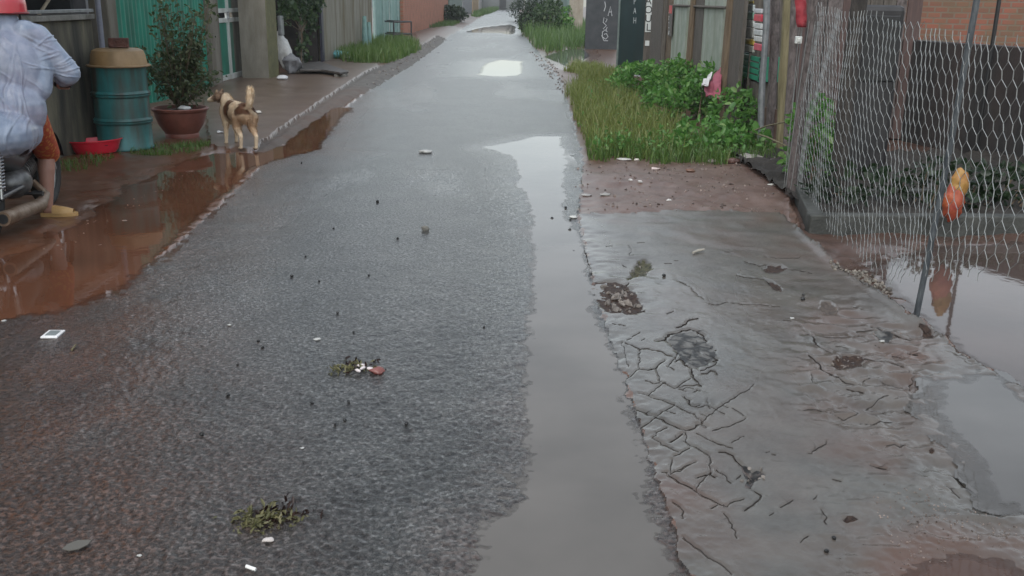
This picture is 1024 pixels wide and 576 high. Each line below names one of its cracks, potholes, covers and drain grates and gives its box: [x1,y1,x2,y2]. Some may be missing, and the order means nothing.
crack [612,281,918,574]
pothole [592,282,643,315]
